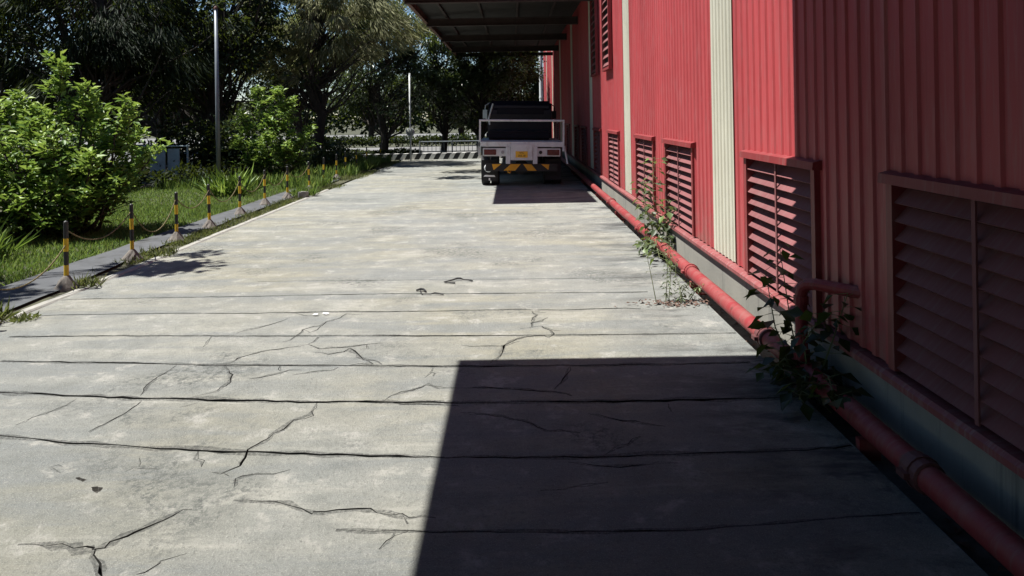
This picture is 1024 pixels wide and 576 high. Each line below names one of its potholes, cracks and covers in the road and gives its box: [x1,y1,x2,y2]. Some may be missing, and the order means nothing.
crack [90,366,175,431]
crack [545,406,669,490]
crack [25,509,191,576]
crack [179,312,382,408]
crack [463,311,557,359]
crack [384,368,571,401]
crack [201,406,433,549]
